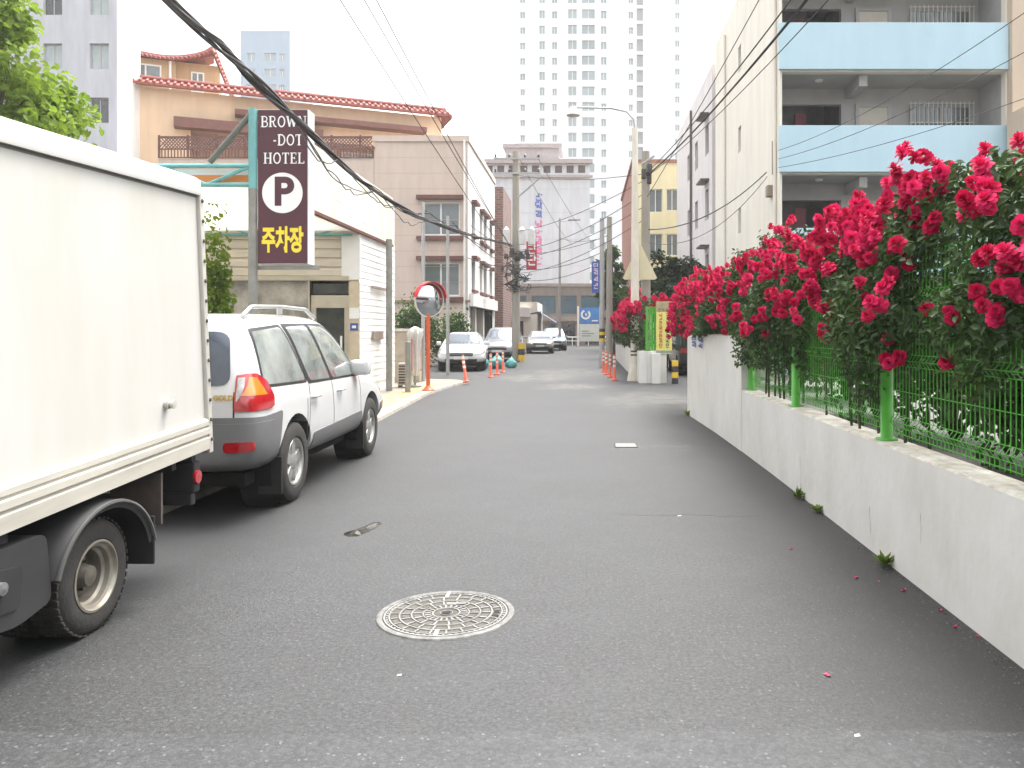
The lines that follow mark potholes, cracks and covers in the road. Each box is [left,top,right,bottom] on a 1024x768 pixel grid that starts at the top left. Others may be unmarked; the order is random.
pothole [344,522,382,537]
manhole cover [376,591,515,641]
